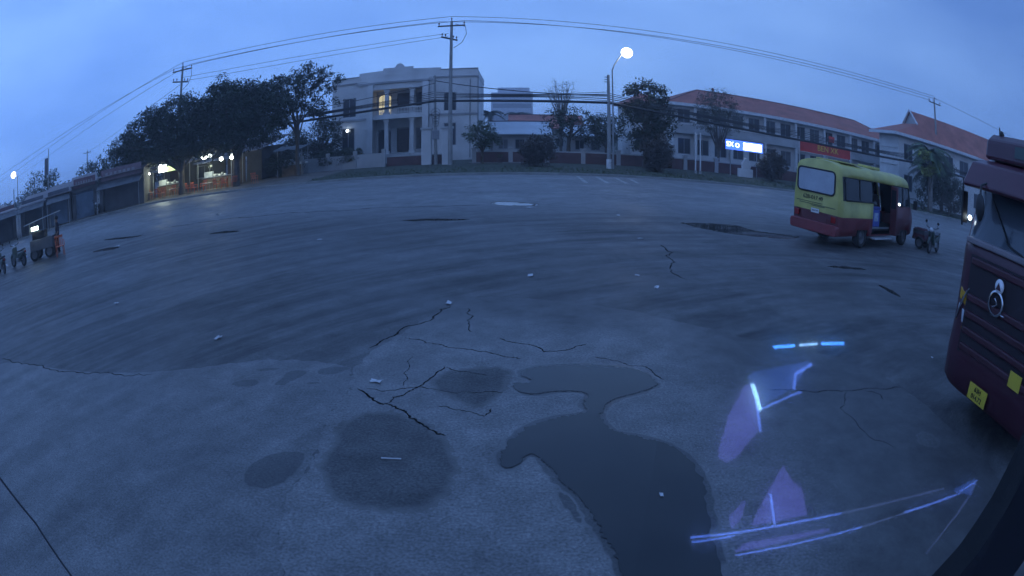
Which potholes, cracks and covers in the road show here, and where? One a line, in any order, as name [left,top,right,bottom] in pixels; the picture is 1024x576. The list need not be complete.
crack [358,358,503,436]
crack [768,387,895,448]
crack [409,309,662,379]
pothole [681,222,799,239]
